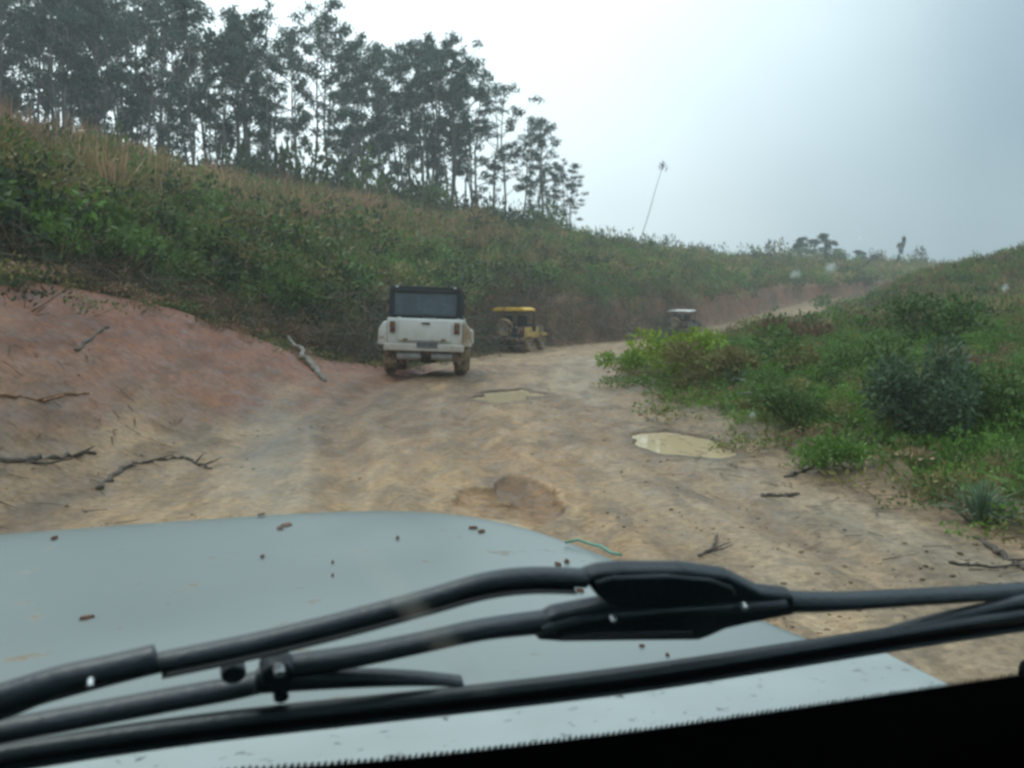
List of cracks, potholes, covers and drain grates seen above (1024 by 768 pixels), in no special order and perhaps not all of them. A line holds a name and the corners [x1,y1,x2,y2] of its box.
pothole [433,469,583,536]
pothole [459,386,559,406]
pothole [618,427,757,464]
